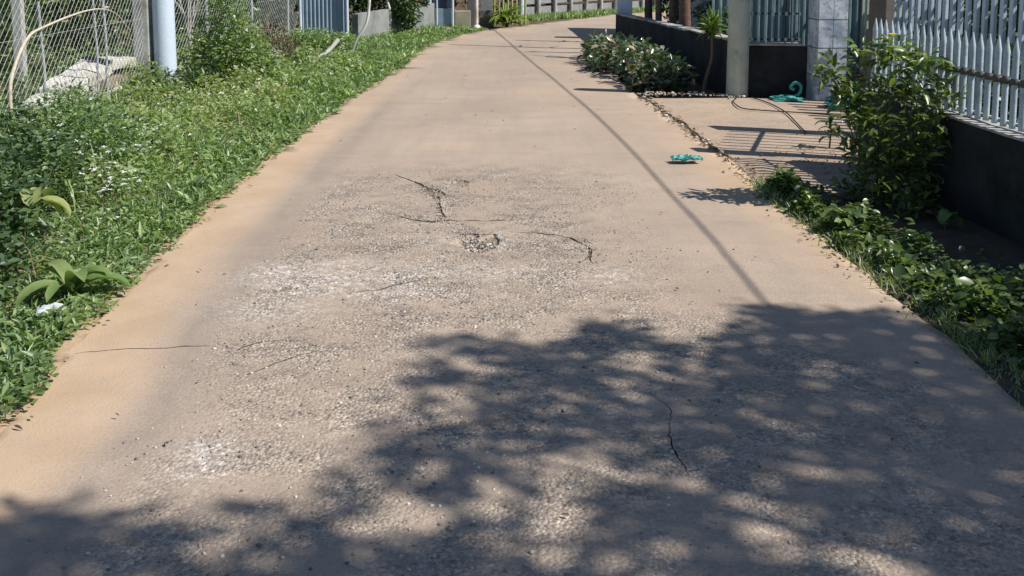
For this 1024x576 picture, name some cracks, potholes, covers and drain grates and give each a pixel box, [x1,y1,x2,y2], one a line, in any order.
crack [650,393,688,473]
pothole [449,233,500,253]
crack [76,346,190,354]
crack [397,175,594,264]
